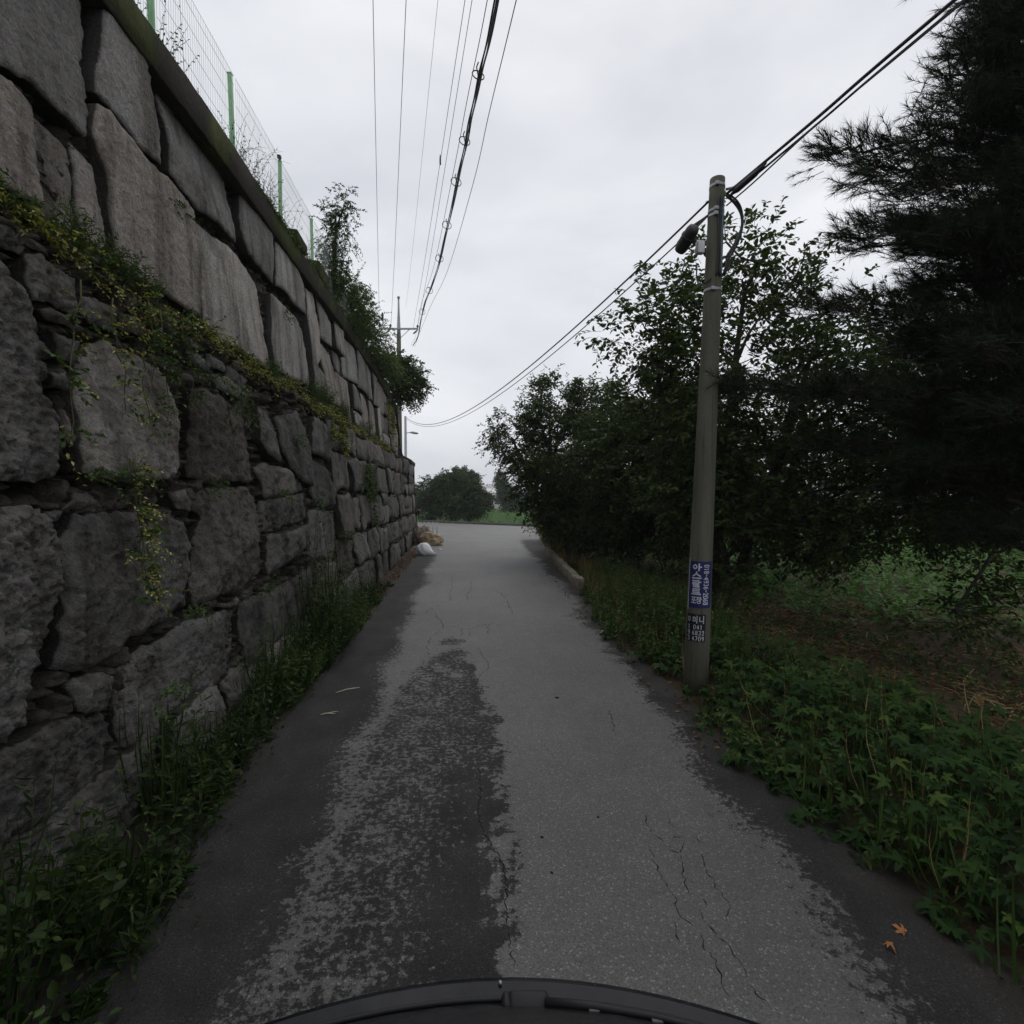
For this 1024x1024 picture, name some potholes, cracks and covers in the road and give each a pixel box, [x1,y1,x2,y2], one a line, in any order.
crack [645,817,766,1001]
crack [426,579,511,653]
crack [473,648,516,964]
